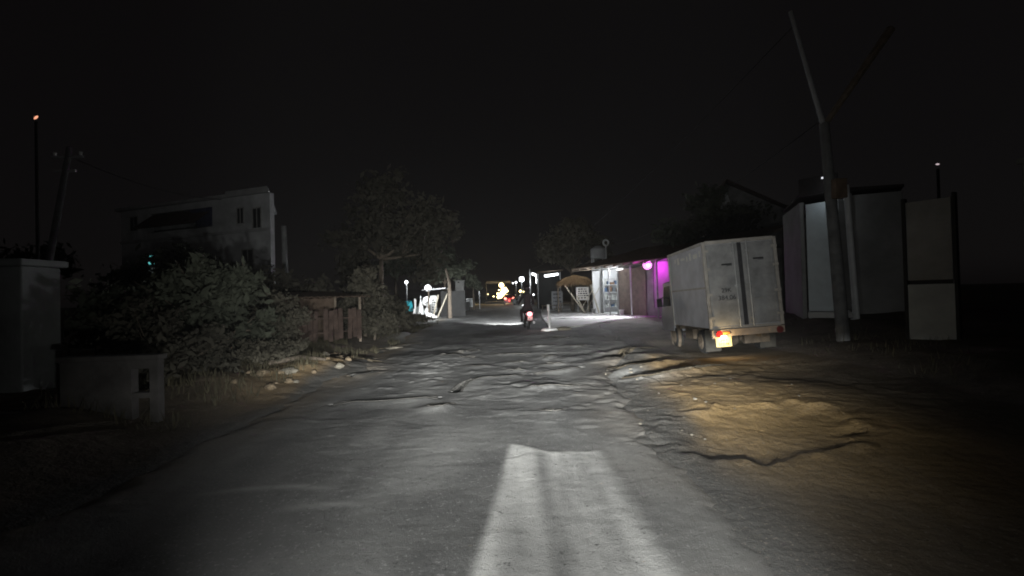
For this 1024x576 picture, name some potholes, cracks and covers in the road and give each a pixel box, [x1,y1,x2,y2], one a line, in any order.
pothole [632,397,896,476]
crack [333,366,580,406]
crack [607,347,727,379]
